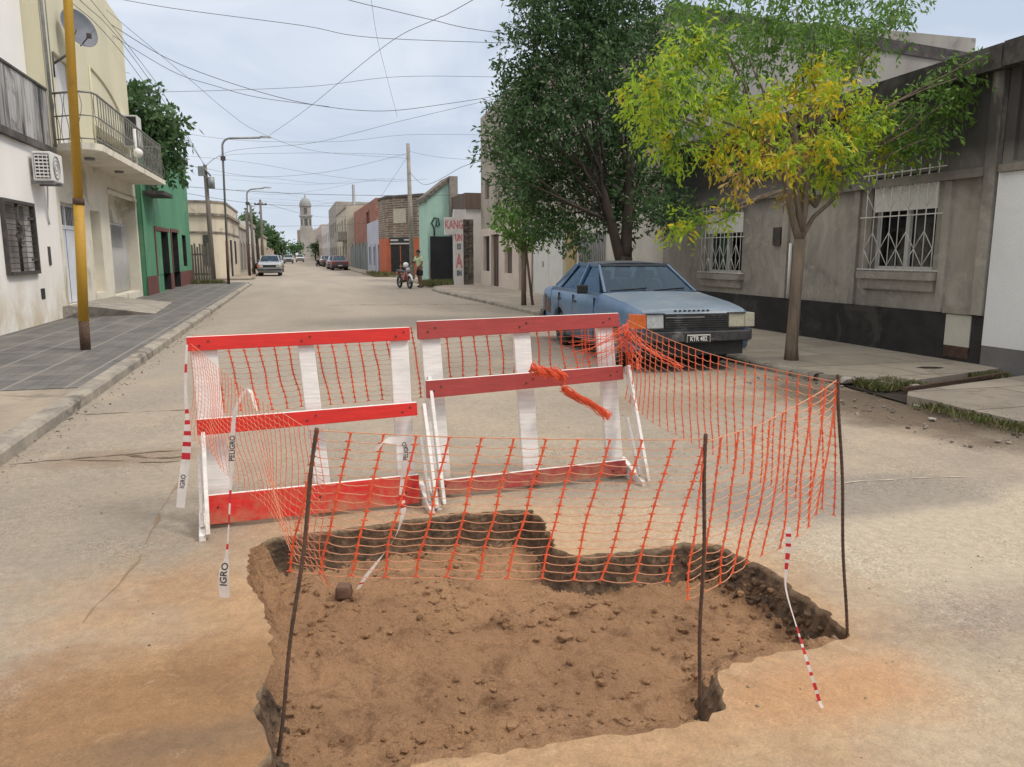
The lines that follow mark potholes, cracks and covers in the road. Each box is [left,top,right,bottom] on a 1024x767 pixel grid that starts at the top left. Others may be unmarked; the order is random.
crack [8,448,199,465]
pothole [246,509,850,767]
